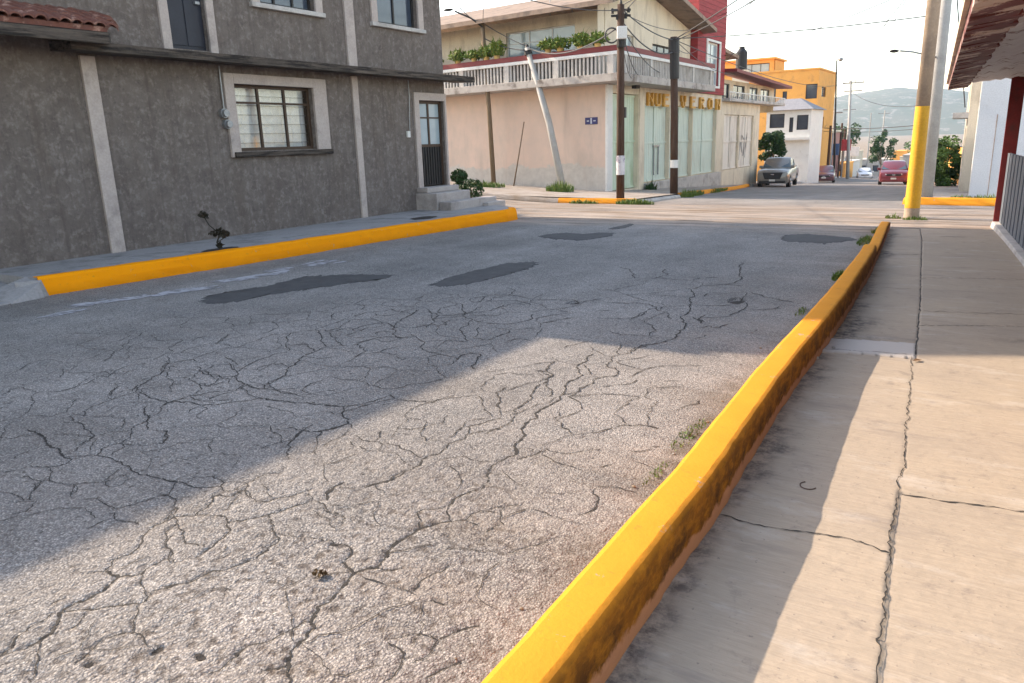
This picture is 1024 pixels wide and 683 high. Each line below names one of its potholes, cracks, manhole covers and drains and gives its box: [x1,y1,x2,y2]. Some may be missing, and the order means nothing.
crack [0,277,792,683]
